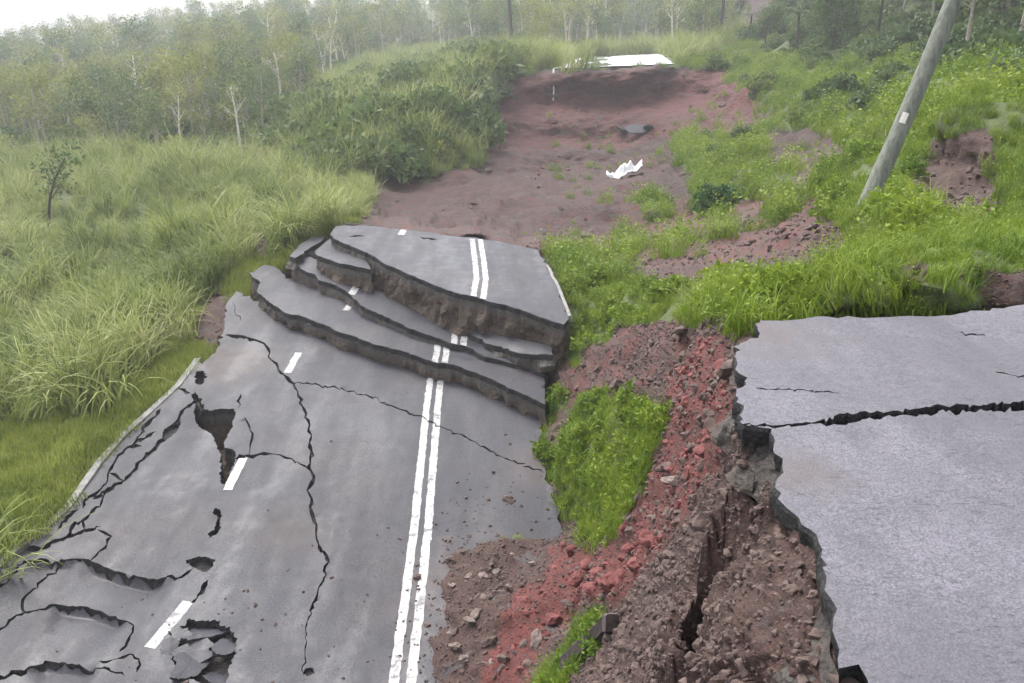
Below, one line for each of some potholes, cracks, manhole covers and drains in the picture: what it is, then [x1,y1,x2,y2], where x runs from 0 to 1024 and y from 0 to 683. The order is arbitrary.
pothole [194,371,207,385]
pothole [185,556,215,572]
crack [227,303,543,672]
pothole [193,405,236,485]
pothole [160,619,238,683]
crack [0,388,208,680]
pothole [208,508,222,538]
crack [740,388,1024,453]
pothole [191,392,206,419]
